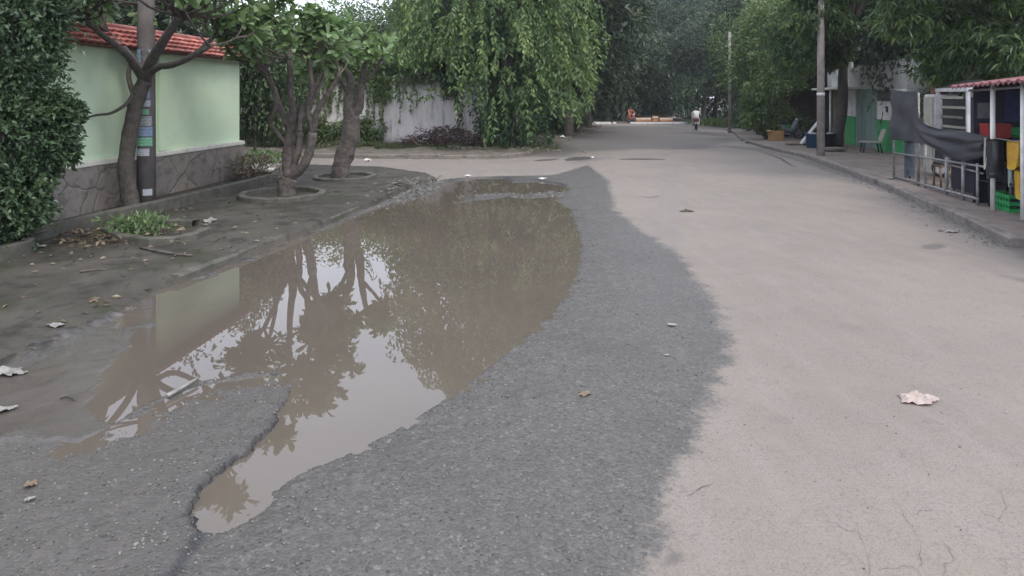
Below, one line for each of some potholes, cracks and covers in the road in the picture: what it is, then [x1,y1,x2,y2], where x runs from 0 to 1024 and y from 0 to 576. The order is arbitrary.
crack [834,495,1007,575]
pothole [42,176,591,576]
